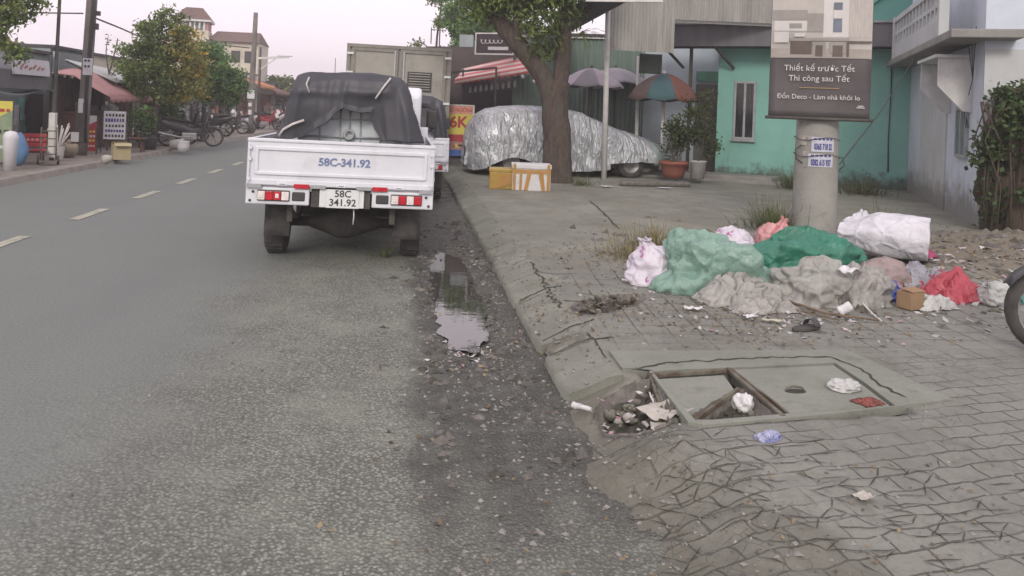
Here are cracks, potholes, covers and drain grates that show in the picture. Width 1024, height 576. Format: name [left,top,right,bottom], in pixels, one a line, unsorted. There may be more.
manhole cover [726,365,889,416]
crack [630,428,1024,575]
manhole cover [647,368,740,423]
pothole [590,377,675,436]
